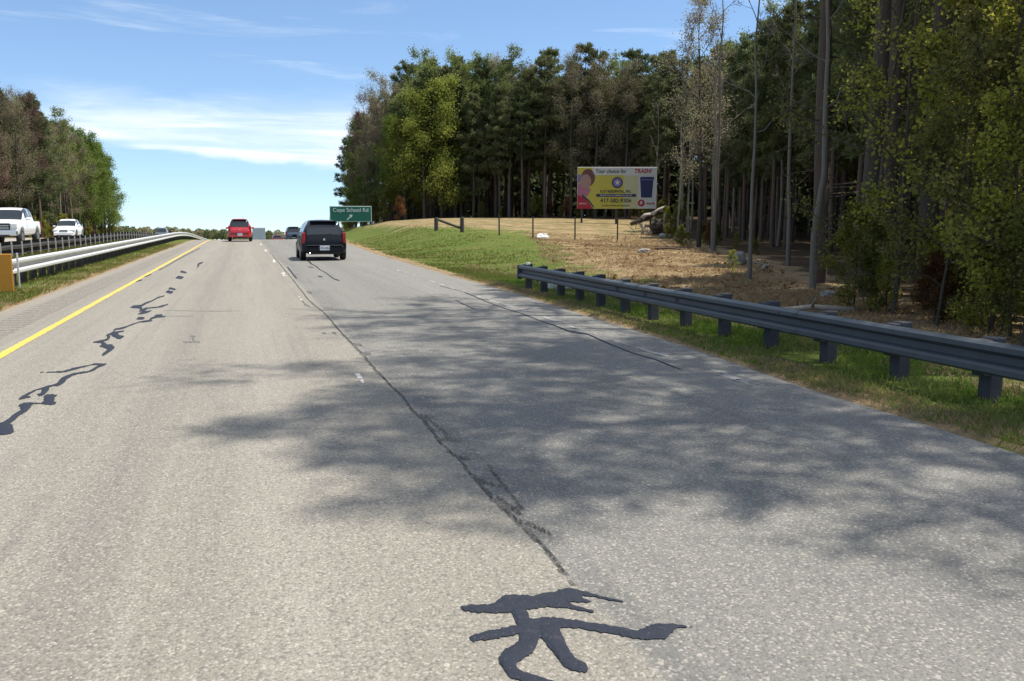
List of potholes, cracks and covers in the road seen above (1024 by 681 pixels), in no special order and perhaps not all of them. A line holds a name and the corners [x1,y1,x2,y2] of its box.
crack [270,252,576,586]
